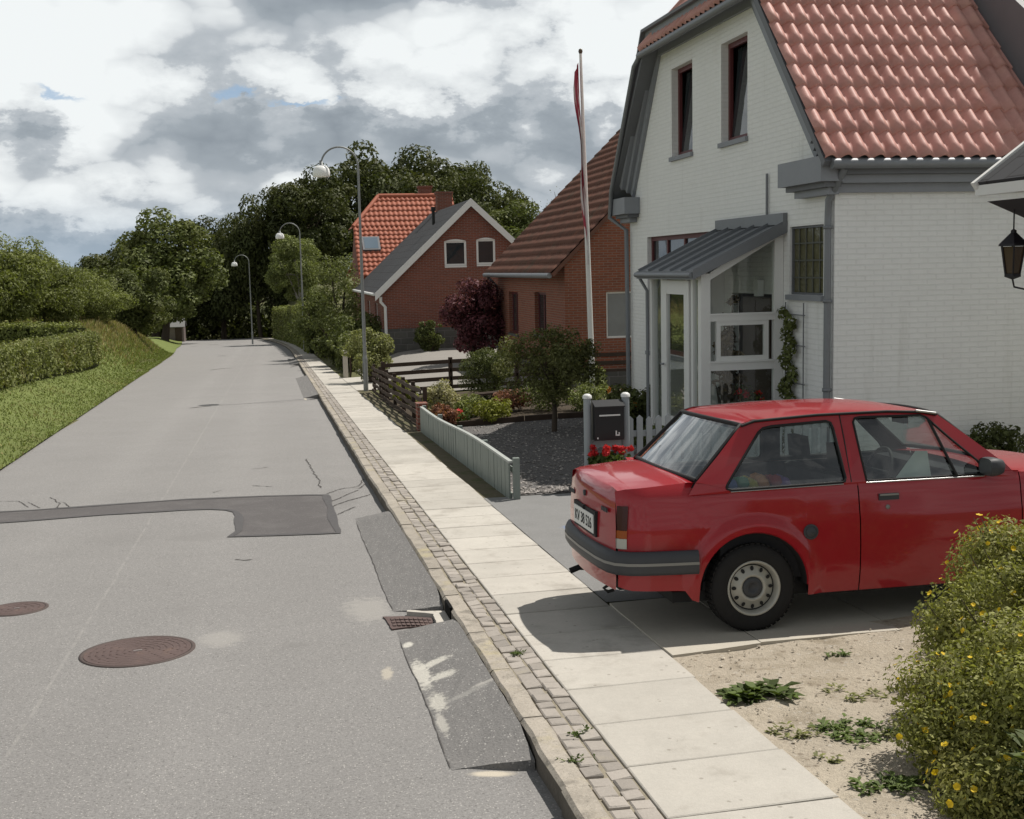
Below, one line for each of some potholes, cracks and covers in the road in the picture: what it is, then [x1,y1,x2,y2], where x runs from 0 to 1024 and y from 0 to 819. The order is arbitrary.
drain grate [383,599,453,631]
manhole cover [79,636,196,668]
manhole cover [0,601,49,617]
crack [306,459,393,609]
